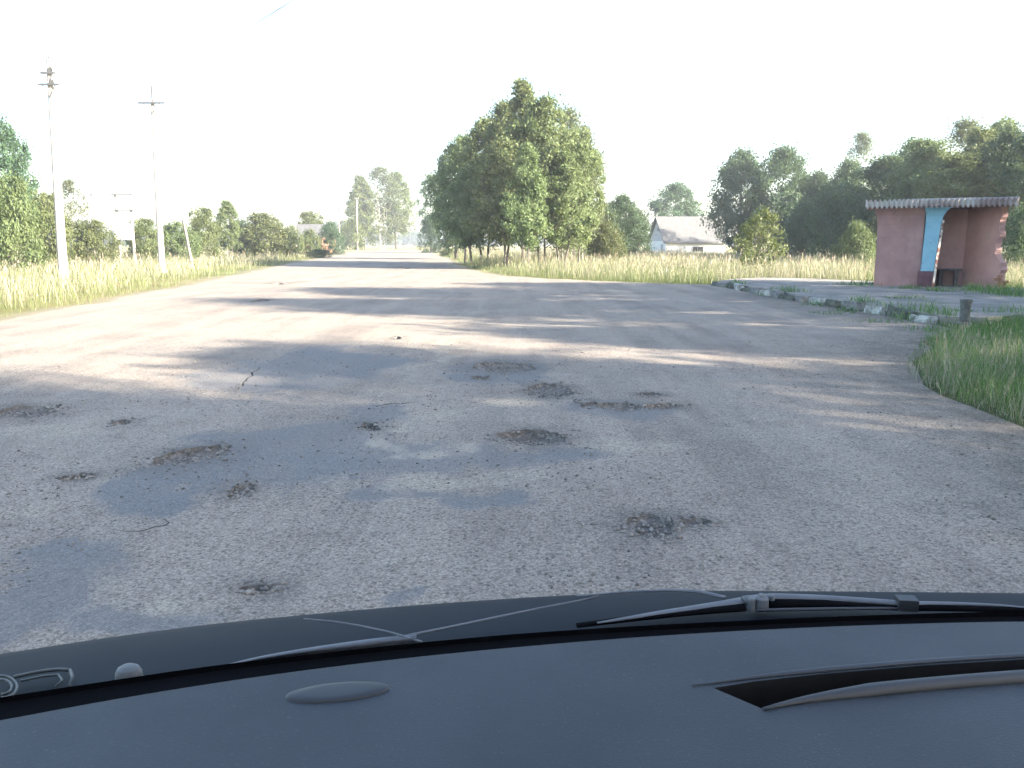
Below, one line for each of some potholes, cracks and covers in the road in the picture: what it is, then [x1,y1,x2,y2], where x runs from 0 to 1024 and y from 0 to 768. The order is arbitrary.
pothole [238,584,273,592]
pothole [596,402,642,410]
crack [120,520,170,532]
pothole [149,444,233,466]
pothole [527,382,574,399]
pothole [496,429,568,445]
pothole [677,518,712,526]
pothole [228,482,257,498]
pothole [472,362,536,371]
pothole [626,513,675,538]
pothole [0,405,58,418]
